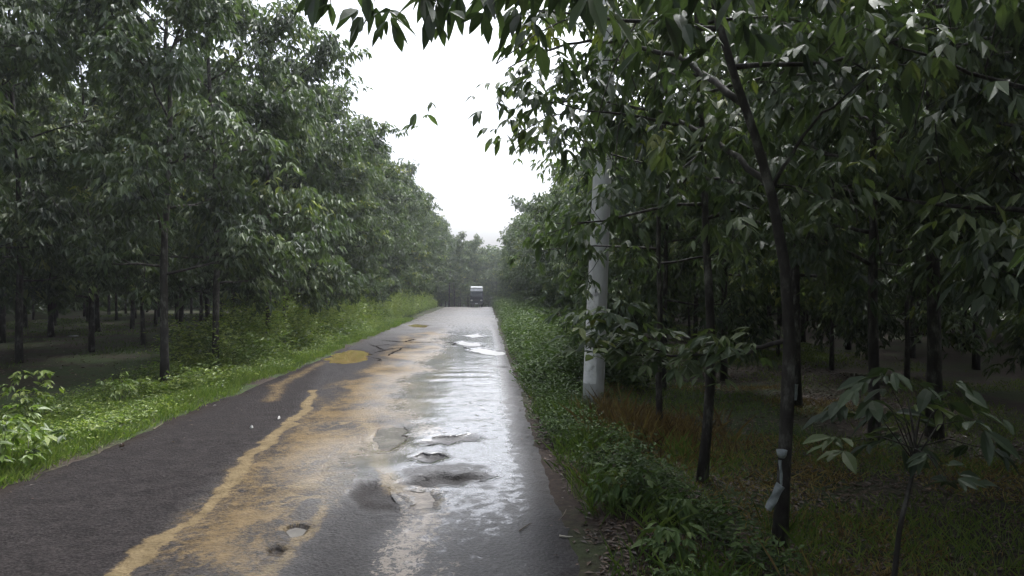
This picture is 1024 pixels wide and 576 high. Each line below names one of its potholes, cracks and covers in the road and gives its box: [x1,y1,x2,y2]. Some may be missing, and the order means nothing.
pothole [388,469,505,492]
pothole [405,451,456,465]
pothole [412,431,488,447]
pothole [273,521,319,542]
pothole [256,541,298,561]
pothole [339,477,417,518]
pothole [361,424,417,453]
crack [371,338,420,361]
